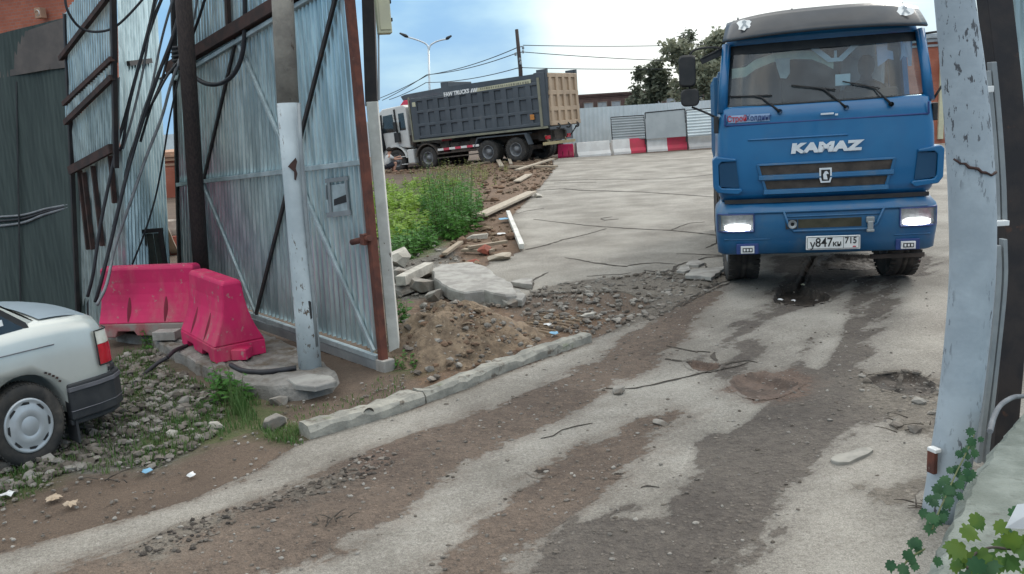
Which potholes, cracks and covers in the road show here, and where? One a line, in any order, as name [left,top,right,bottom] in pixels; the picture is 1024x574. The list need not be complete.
pothole [864,370,939,399]
crack [608,346,755,389]
crack [517,208,731,321]
pothole [769,256,833,307]
